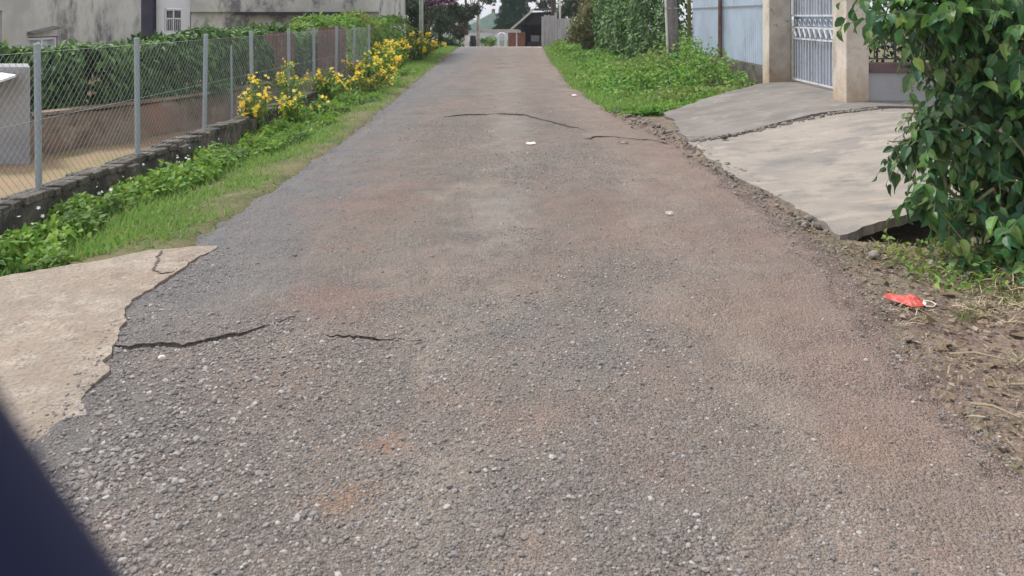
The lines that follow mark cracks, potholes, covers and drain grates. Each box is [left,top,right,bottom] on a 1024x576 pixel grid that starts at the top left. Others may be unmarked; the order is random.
crack [152,250,171,274]
crack [445,112,666,142]
crack [324,331,420,344]
crack [112,315,294,354]
